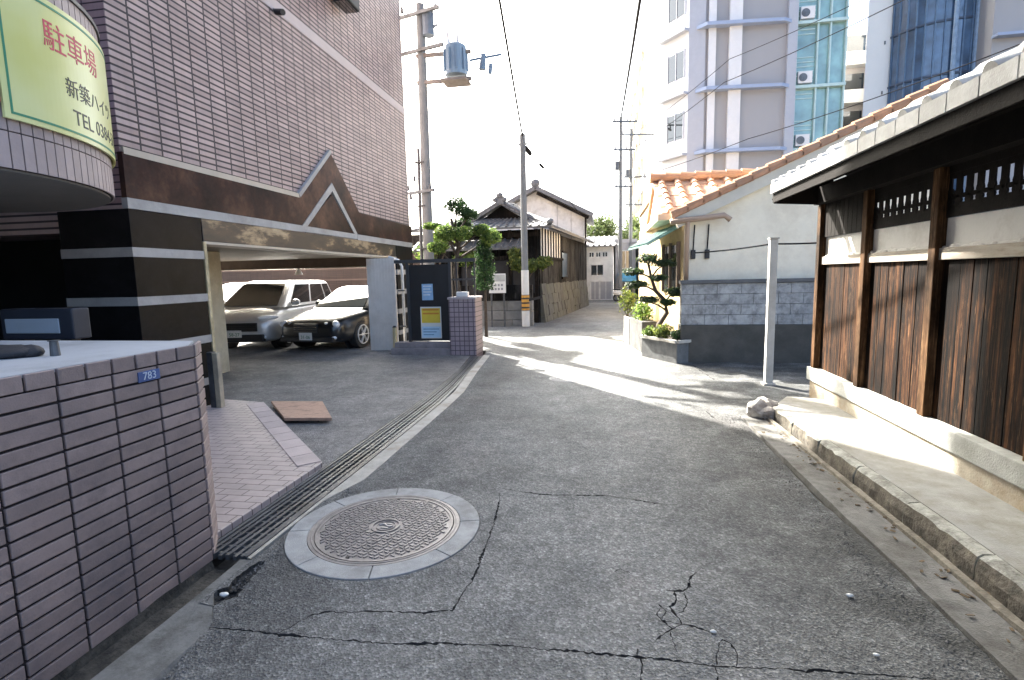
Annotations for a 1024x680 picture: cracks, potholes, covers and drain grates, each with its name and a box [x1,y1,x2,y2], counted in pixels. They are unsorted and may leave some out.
pothole [207,560,265,607]
crack [209,488,936,680]
manhole cover [283,488,480,581]
